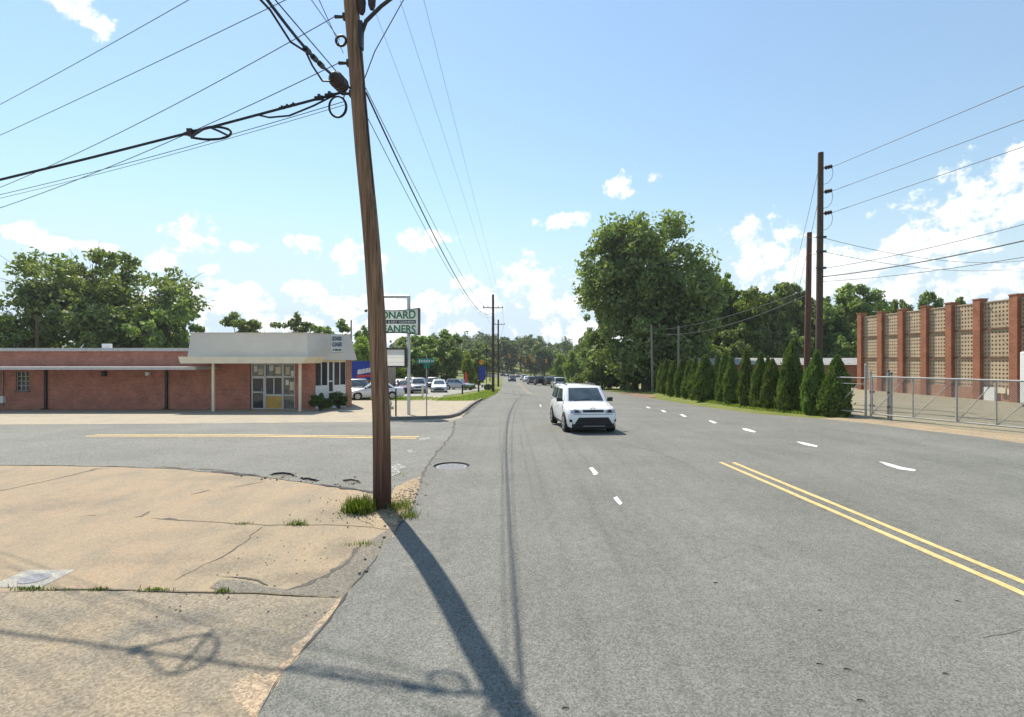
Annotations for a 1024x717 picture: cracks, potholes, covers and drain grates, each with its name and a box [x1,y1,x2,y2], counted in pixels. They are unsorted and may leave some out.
pothole [270,472,295,480]
utility cover [0,570,75,592]
crack [175,528,267,585]
crack [395,397,504,531]
